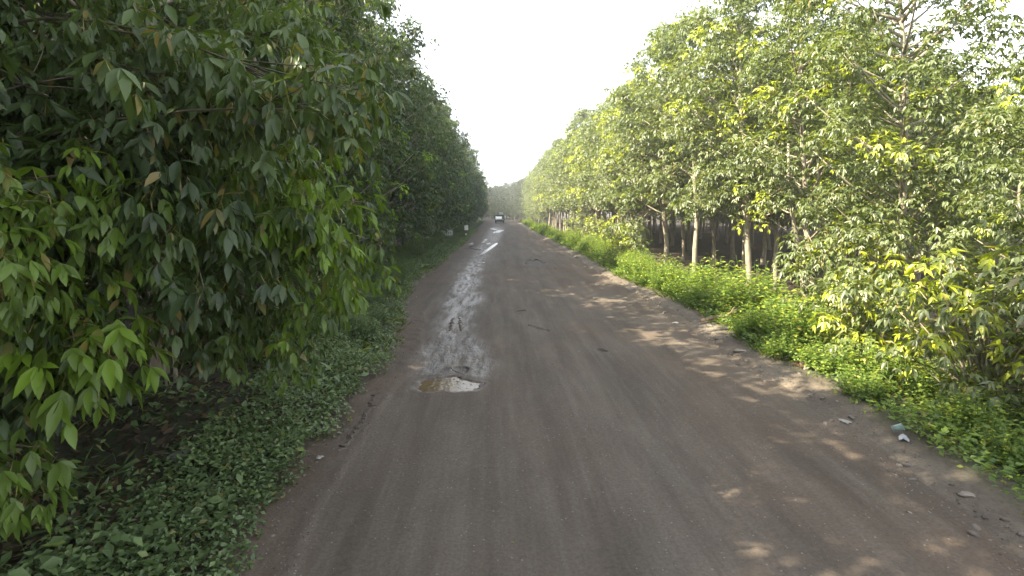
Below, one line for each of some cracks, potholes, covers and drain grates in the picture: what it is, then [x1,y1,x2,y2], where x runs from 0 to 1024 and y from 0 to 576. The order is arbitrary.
pothole [407,373,491,394]
pothole [450,365,472,374]
